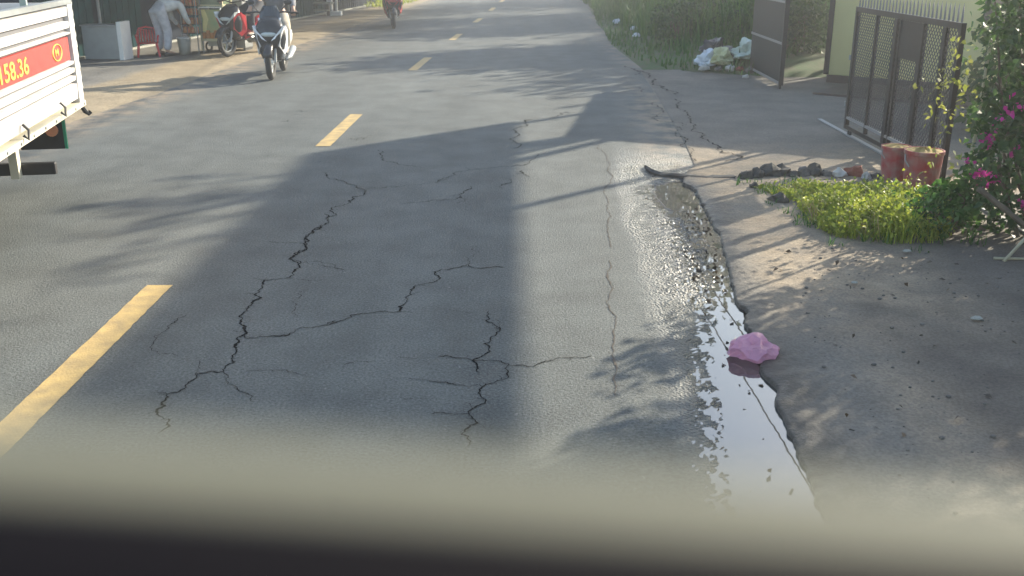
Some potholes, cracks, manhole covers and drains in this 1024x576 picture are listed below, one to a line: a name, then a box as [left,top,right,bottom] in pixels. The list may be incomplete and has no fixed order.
crack [624,66,744,161]
crack [148,155,538,433]
crack [346,311,589,444]
